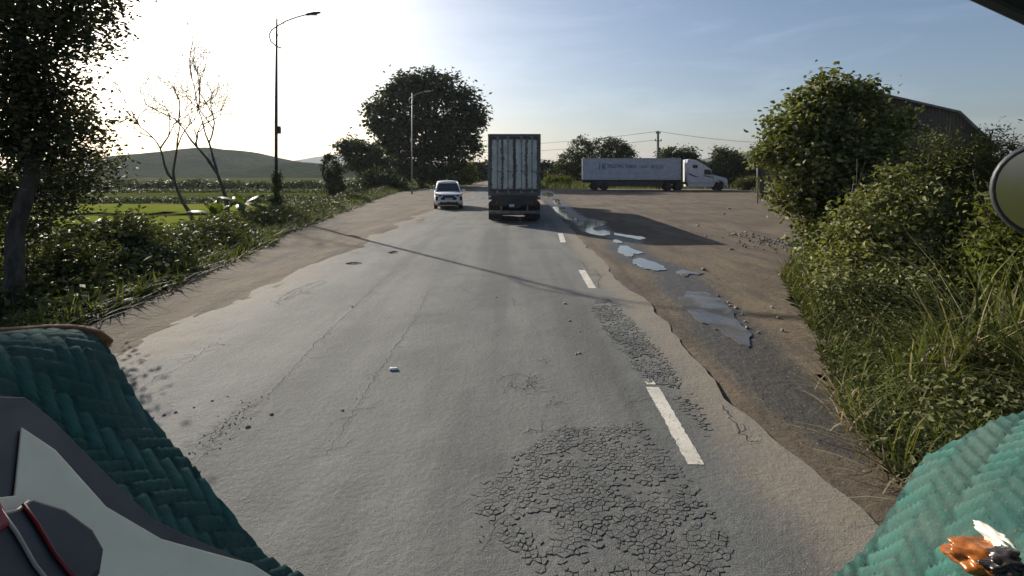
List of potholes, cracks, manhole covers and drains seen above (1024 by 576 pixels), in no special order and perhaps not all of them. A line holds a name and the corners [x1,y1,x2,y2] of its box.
crack [450,259,762,576]
crack [134,271,432,472]
